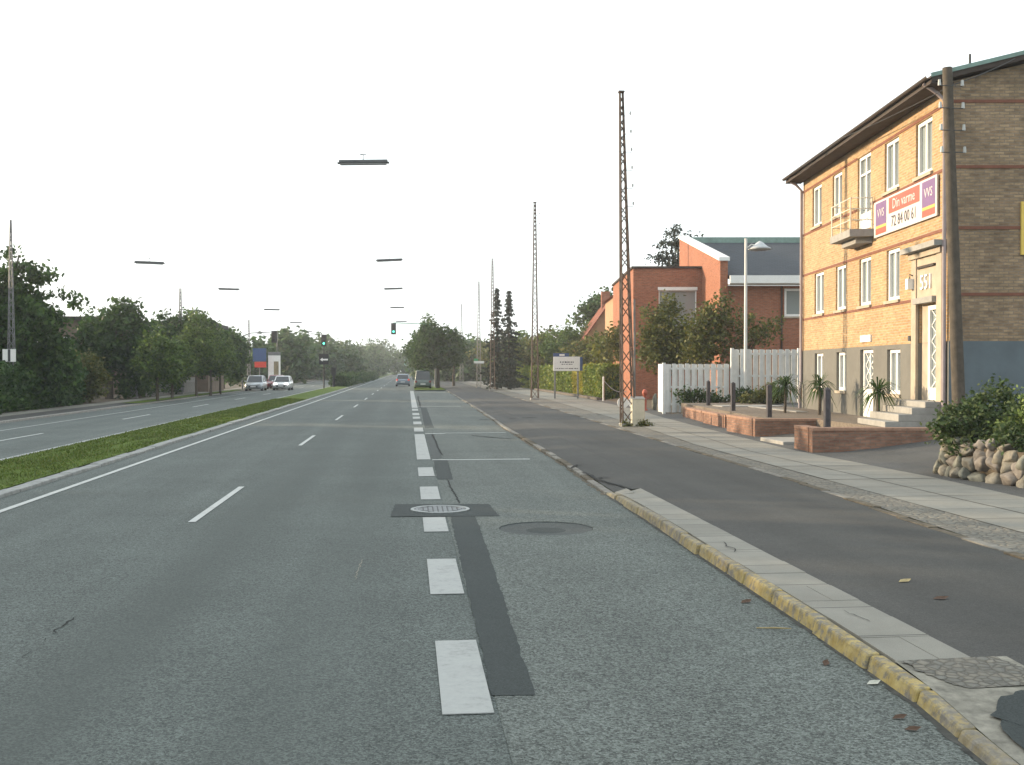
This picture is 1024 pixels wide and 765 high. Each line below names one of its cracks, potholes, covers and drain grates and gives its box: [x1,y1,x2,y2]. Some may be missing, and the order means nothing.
crack [570,464,631,489]
manhole cover [411,505,470,514]
